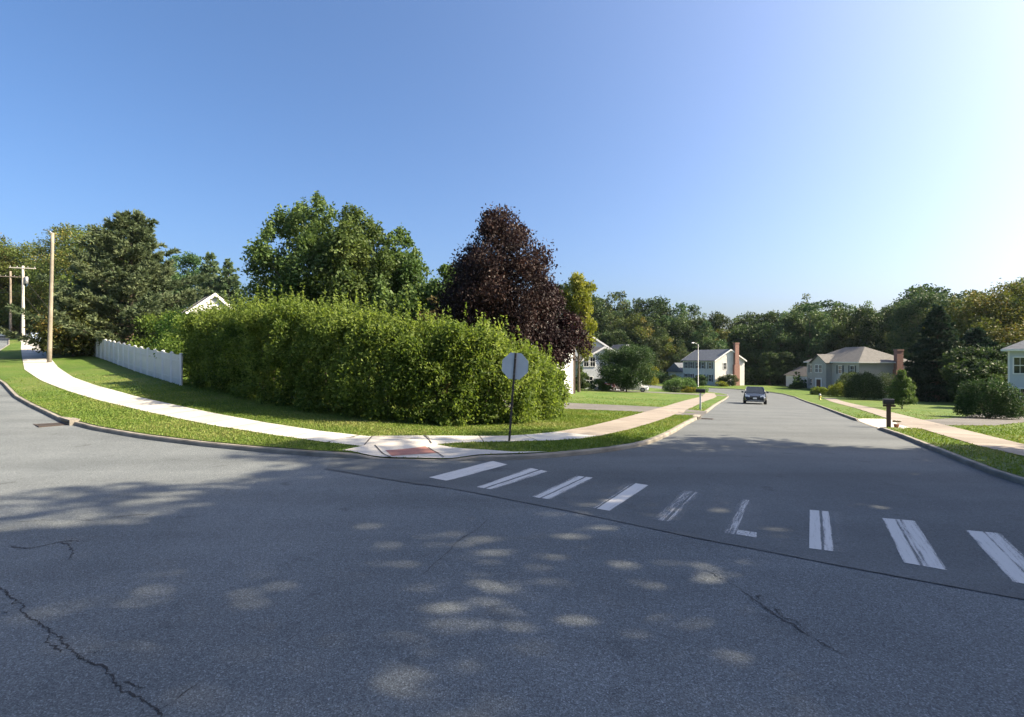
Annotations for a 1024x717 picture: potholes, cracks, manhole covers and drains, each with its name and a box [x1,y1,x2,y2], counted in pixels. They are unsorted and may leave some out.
crack [10,538,88,559]
drain grate [33,417,81,427]
crack [0,572,297,717]
crack [714,574,846,655]
